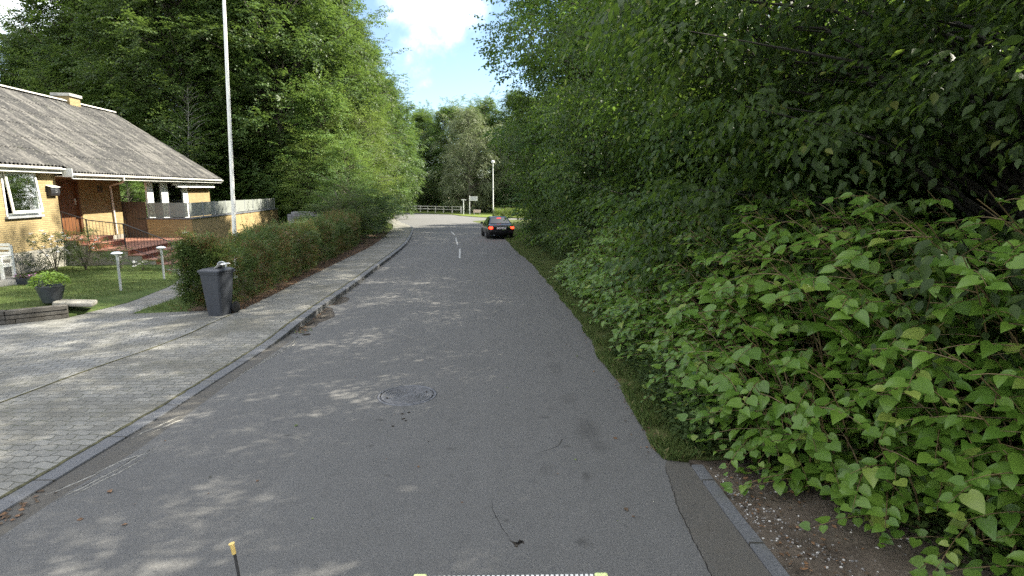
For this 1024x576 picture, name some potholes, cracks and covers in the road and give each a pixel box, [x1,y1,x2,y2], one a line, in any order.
crack [43,416,188,501]
manhole cover [377,385,437,406]
pothole [298,308,335,330]
